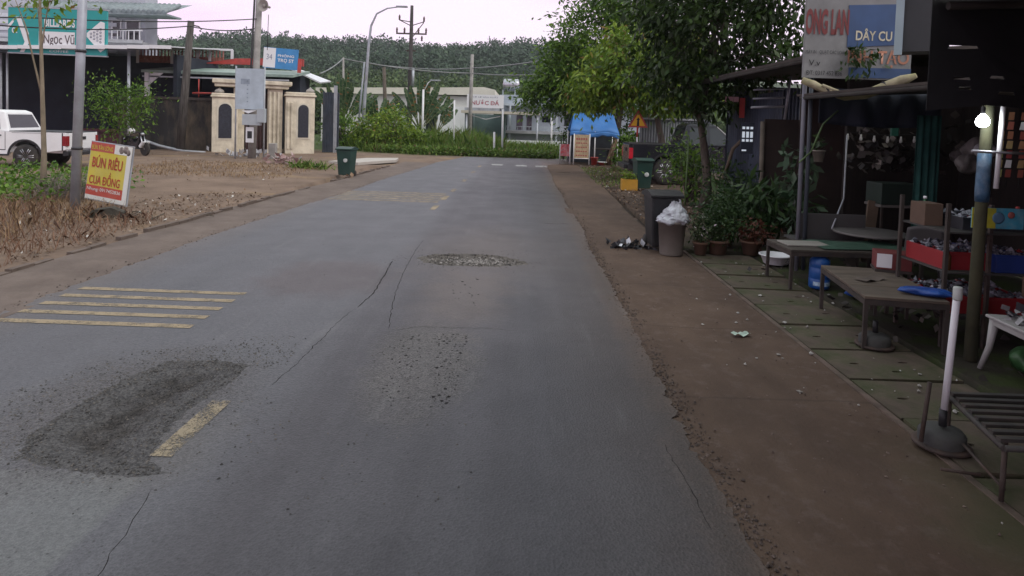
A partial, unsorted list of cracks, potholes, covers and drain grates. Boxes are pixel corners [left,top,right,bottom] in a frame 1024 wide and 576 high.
crack [665,445,714,533]
pothole [417,253,528,267]
crack [272,241,511,385]
crack [98,494,149,576]
